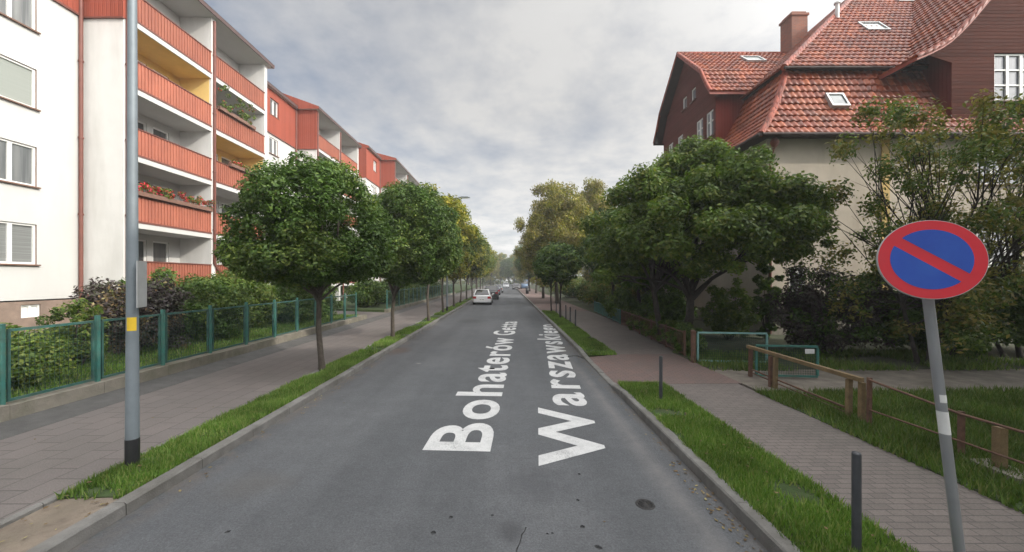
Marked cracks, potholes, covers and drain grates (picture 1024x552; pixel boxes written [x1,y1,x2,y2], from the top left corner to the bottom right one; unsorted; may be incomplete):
manhole cover [635,499,655,510]
